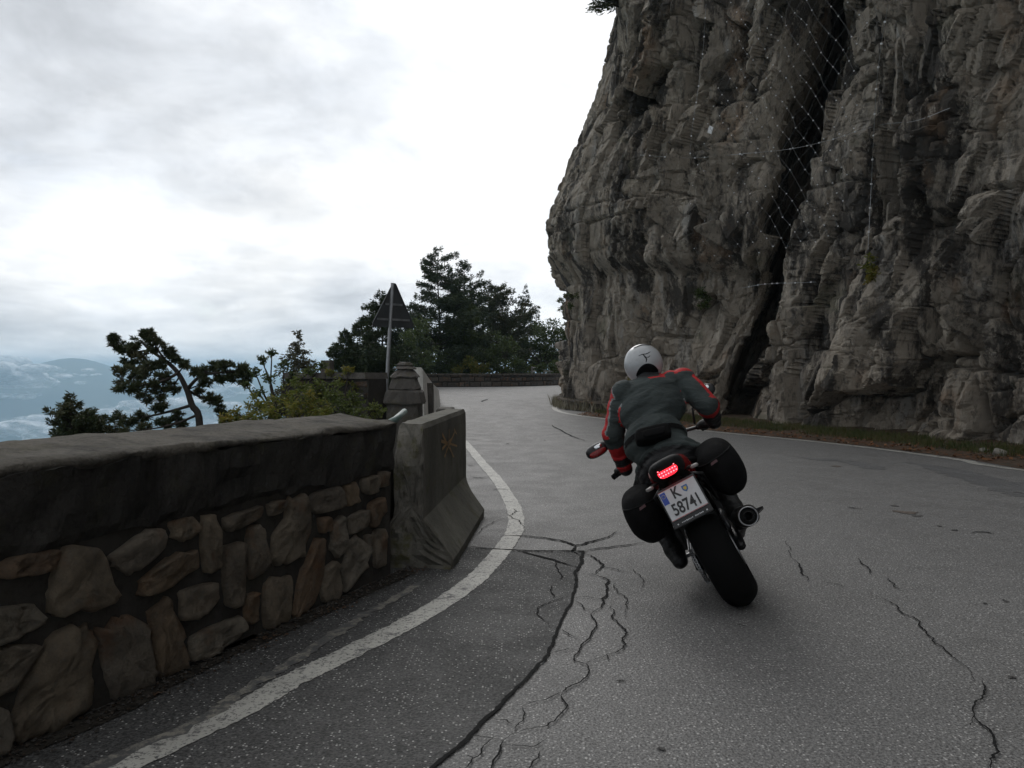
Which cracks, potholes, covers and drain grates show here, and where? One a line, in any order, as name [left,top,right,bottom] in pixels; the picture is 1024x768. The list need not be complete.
crack [466,508,645,768]
crack [858,558,1000,768]
